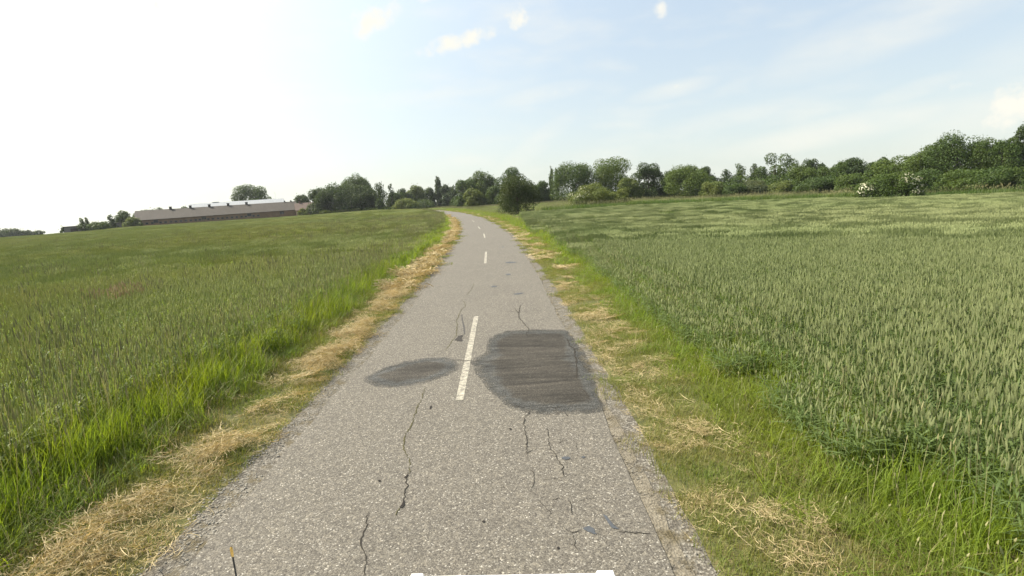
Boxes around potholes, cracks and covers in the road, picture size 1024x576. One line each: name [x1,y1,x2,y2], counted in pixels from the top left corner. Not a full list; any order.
crack [395,389,425,515]
crack [523,338,592,550]
crack [360,511,369,575]
